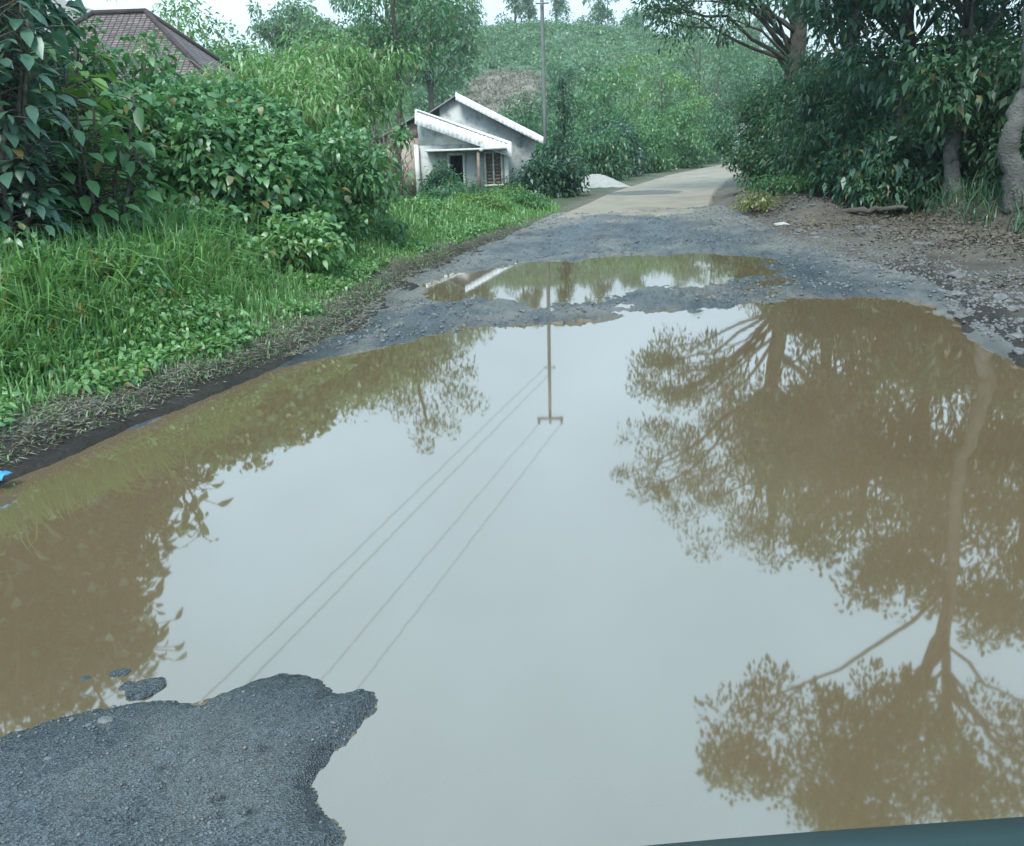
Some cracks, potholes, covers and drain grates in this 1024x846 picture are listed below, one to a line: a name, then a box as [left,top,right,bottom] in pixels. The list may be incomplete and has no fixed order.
pothole [398,253,799,309]
pothole [0,291,1024,846]
